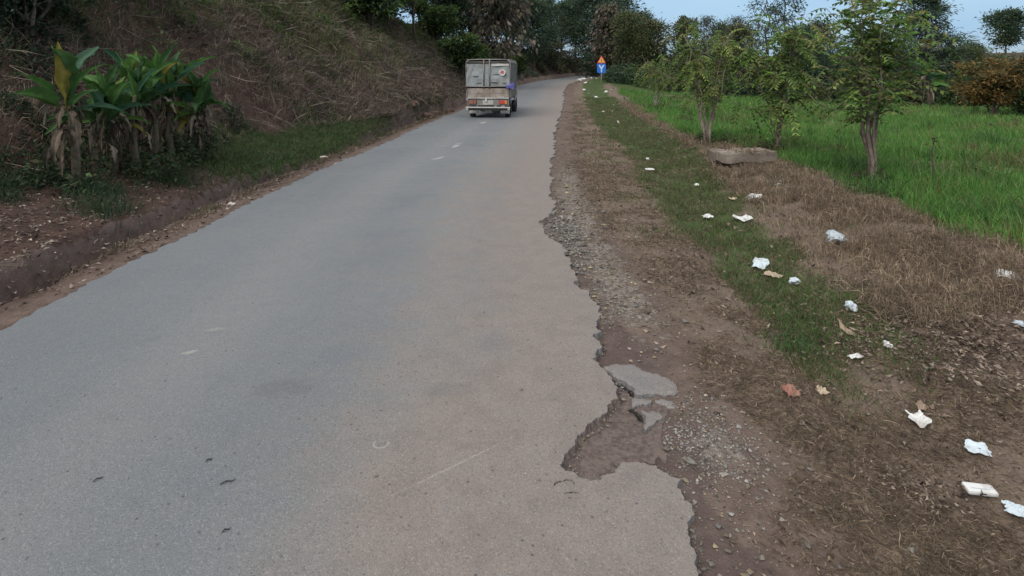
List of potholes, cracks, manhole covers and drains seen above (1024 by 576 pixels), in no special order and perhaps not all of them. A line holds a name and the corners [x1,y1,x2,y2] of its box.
pothole [560,373,668,481]
